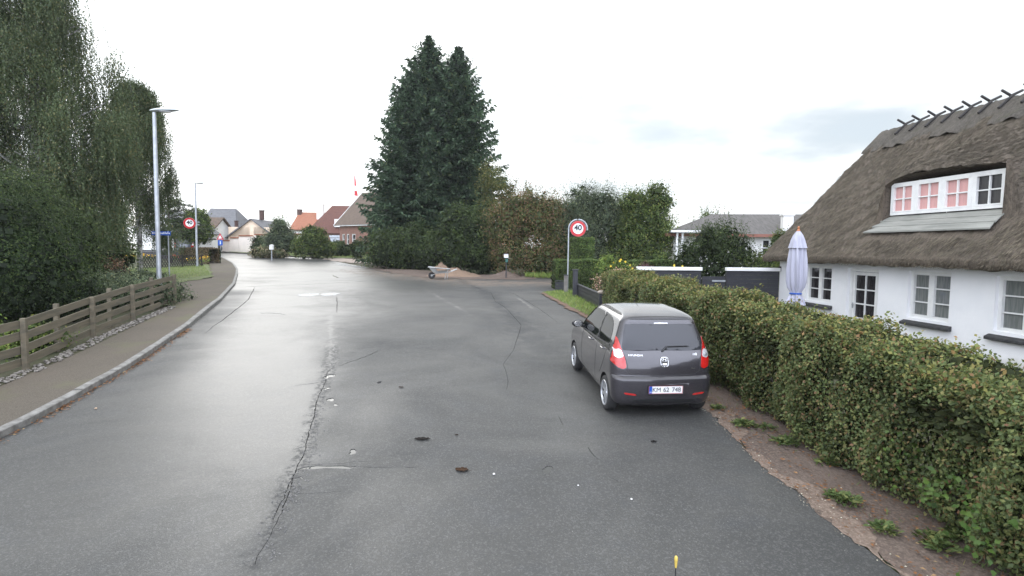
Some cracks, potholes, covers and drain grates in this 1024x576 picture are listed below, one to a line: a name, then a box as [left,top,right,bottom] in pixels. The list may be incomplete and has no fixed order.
crack [476,287,557,386]
